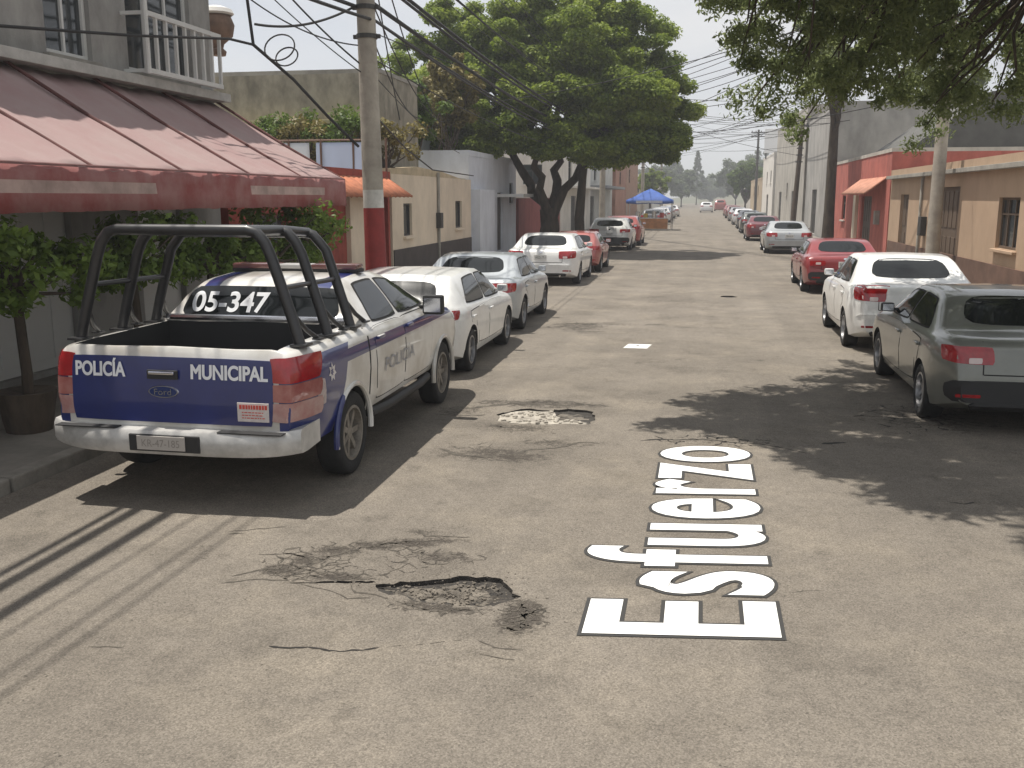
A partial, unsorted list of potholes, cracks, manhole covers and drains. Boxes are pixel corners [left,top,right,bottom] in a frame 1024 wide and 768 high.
pothole [354,572,549,615]
crack [224,529,550,660]
pothole [498,411,595,425]
